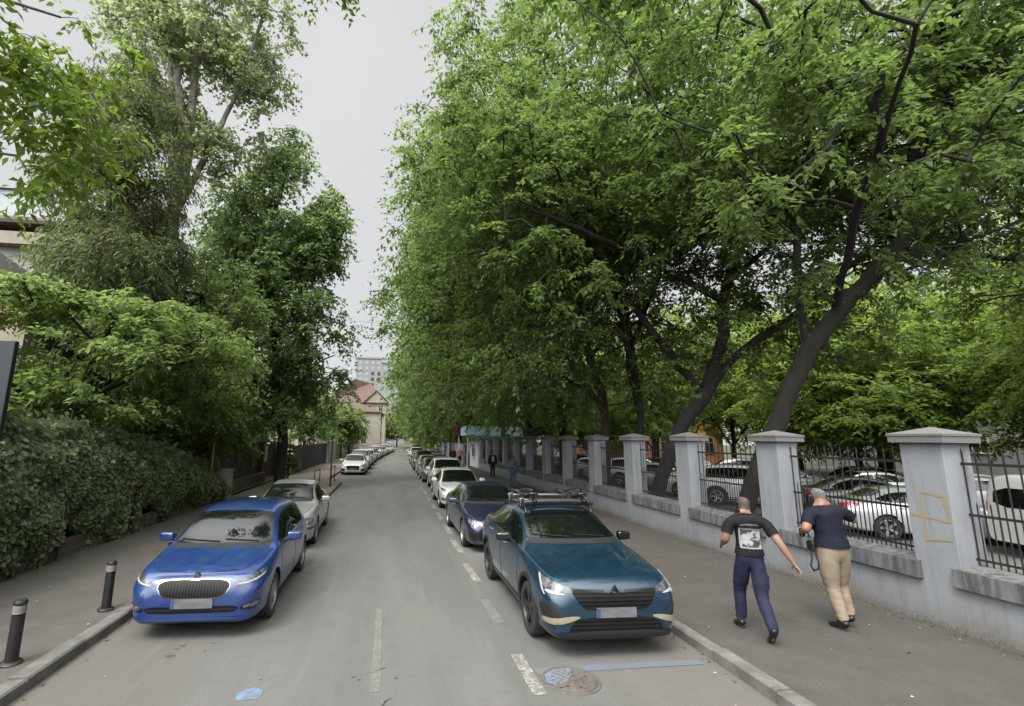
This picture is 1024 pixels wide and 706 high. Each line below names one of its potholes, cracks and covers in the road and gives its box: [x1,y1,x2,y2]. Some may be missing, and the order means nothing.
manhole cover [541,666,602,696]
